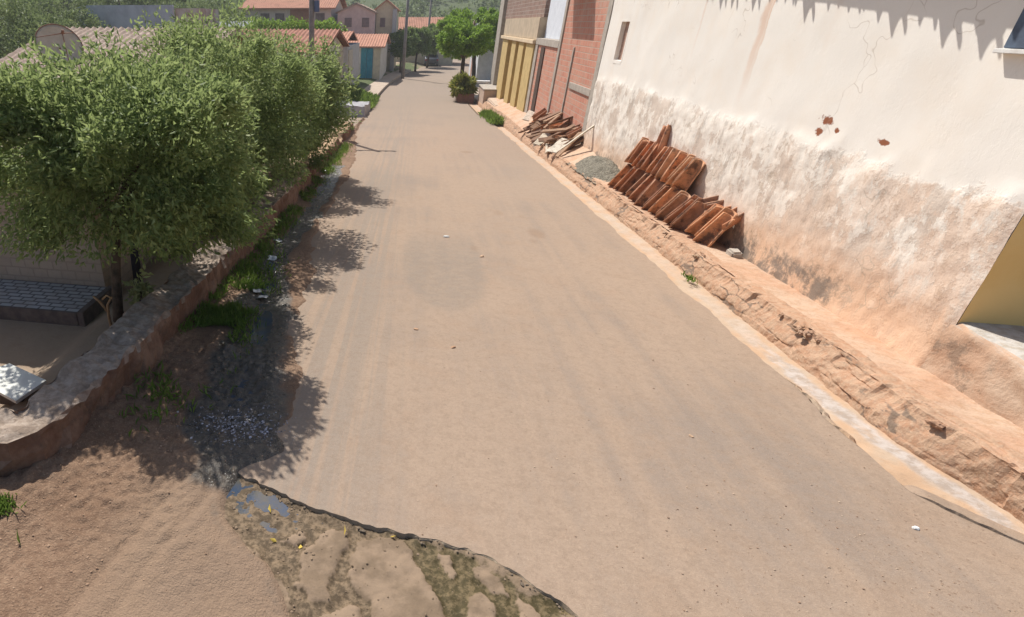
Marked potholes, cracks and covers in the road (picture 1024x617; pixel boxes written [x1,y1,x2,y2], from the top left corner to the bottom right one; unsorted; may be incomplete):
pothole [224,473,578,617]
